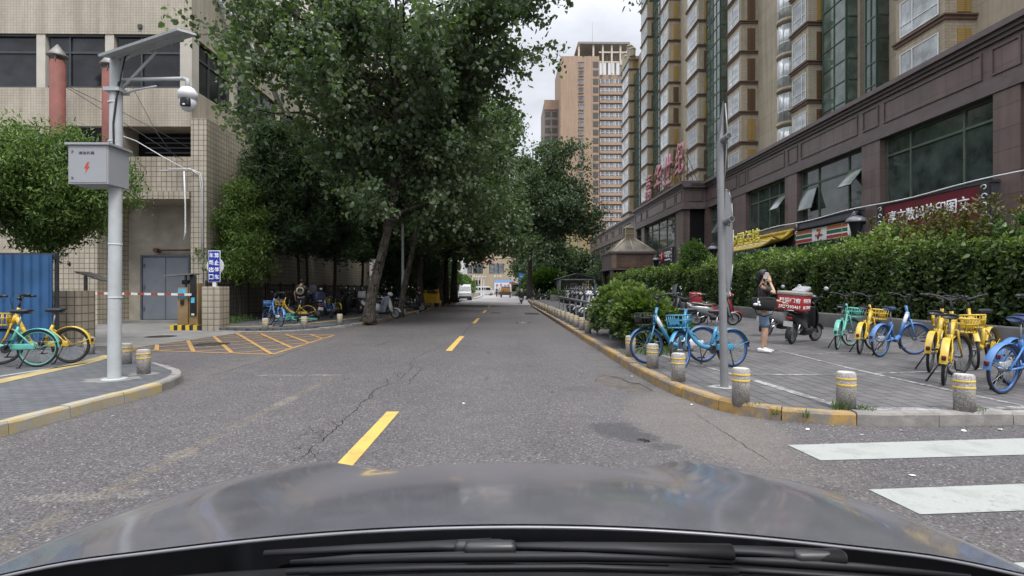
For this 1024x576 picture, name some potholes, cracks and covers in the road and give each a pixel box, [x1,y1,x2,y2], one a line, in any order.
crack [276,355,421,463]
